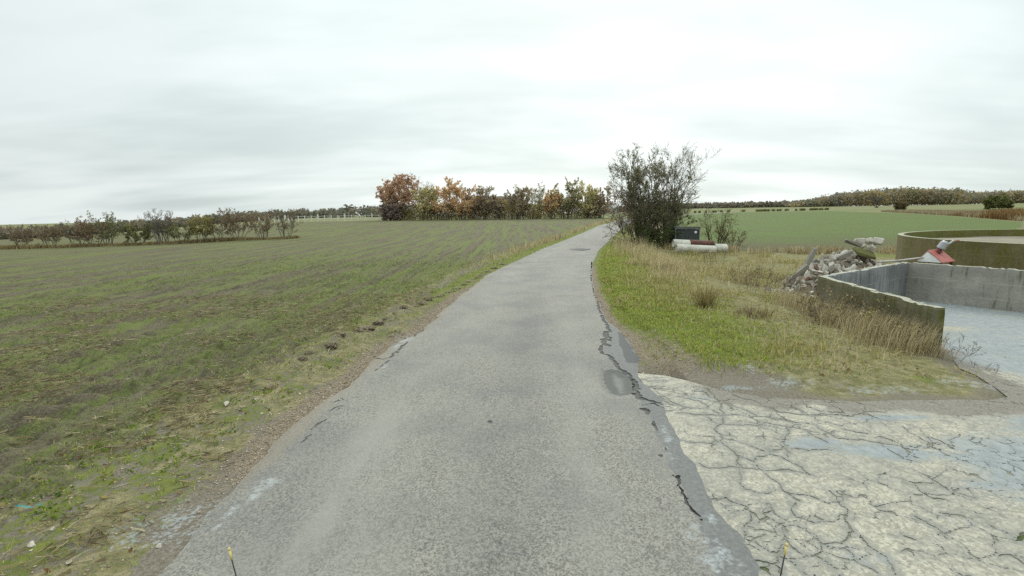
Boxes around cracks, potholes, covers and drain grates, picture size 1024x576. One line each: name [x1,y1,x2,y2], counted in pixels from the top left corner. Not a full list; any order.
crack [375,334,417,371]
crack [300,398,344,443]
crack [592,289,663,414]
